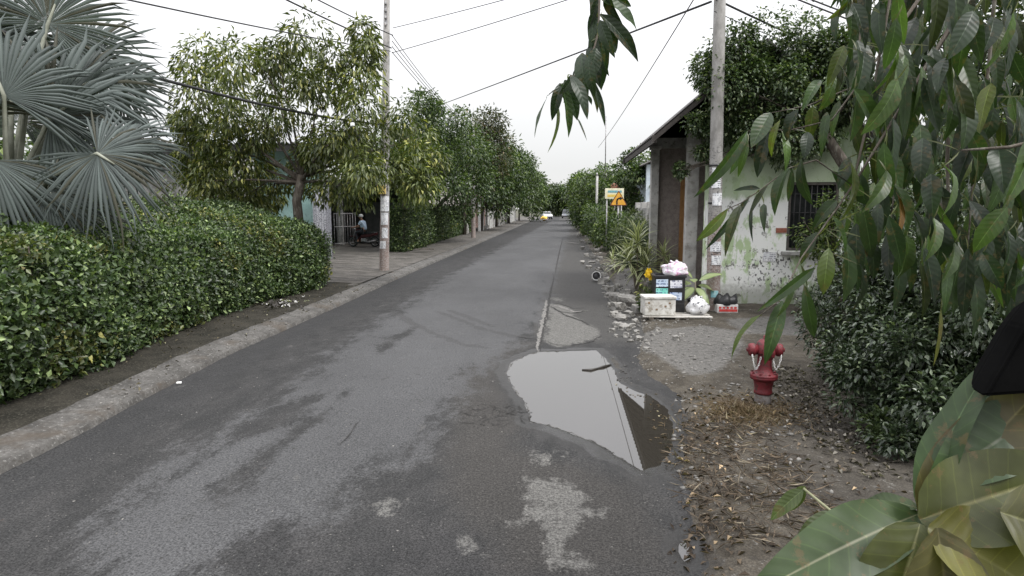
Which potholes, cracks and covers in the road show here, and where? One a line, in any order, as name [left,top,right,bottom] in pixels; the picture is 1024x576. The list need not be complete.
pothole [496,348,689,475]
